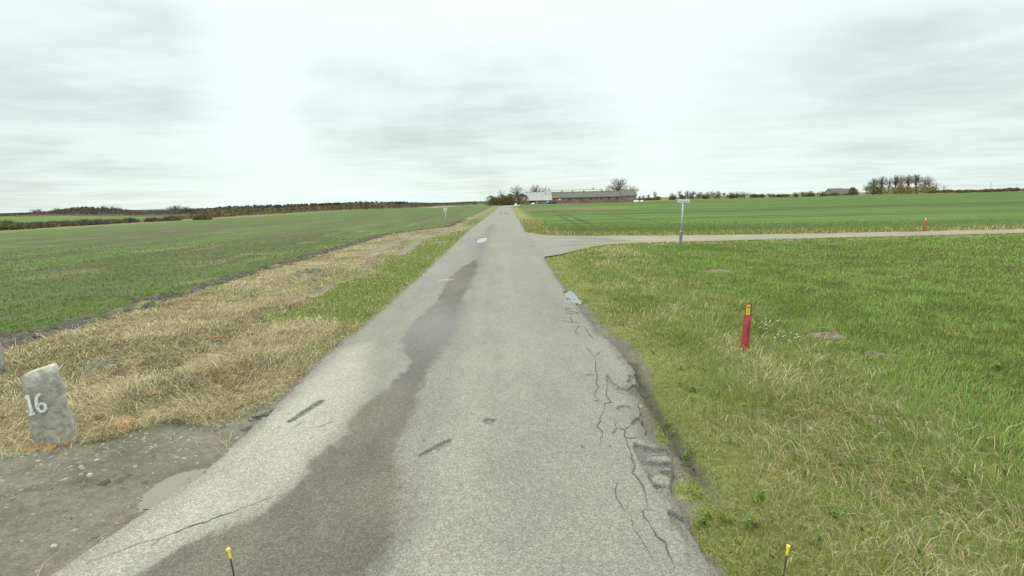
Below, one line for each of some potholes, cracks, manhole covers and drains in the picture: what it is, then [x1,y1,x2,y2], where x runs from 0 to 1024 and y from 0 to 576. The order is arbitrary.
pothole [633,442,674,490]
crack [561,308,675,568]
crack [83,493,283,565]
